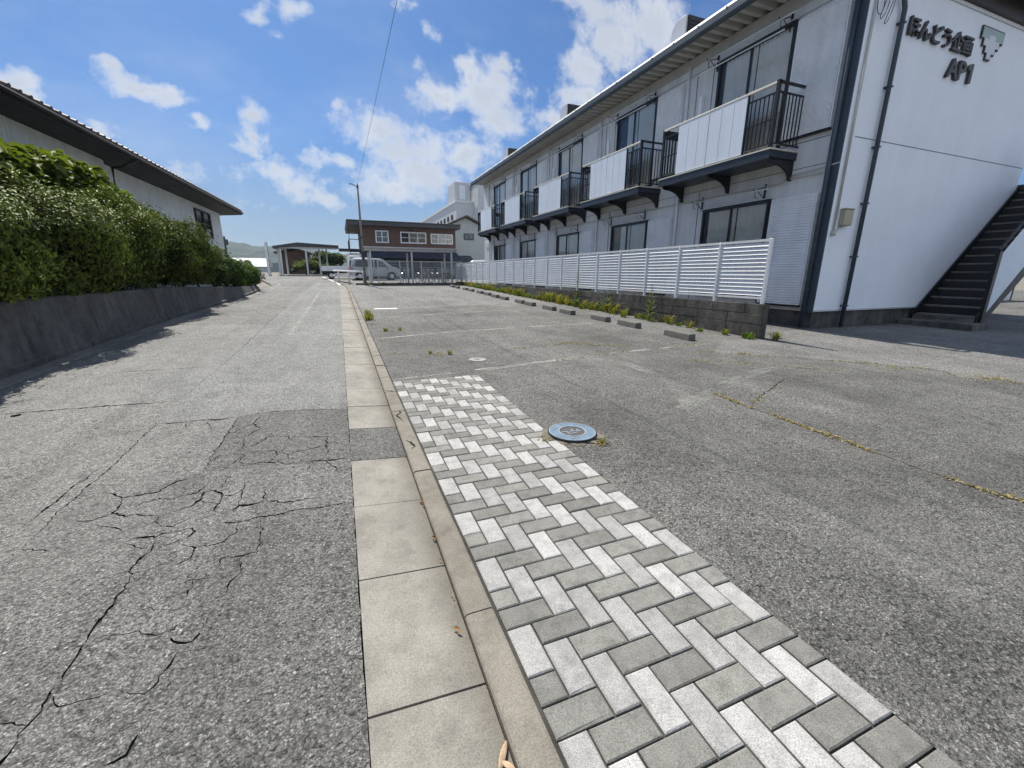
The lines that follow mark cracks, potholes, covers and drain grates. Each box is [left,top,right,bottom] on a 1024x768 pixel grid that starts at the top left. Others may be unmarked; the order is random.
manhole cover [541,422,604,446]
crack [0,409,354,766]
crack [525,343,1023,501]
